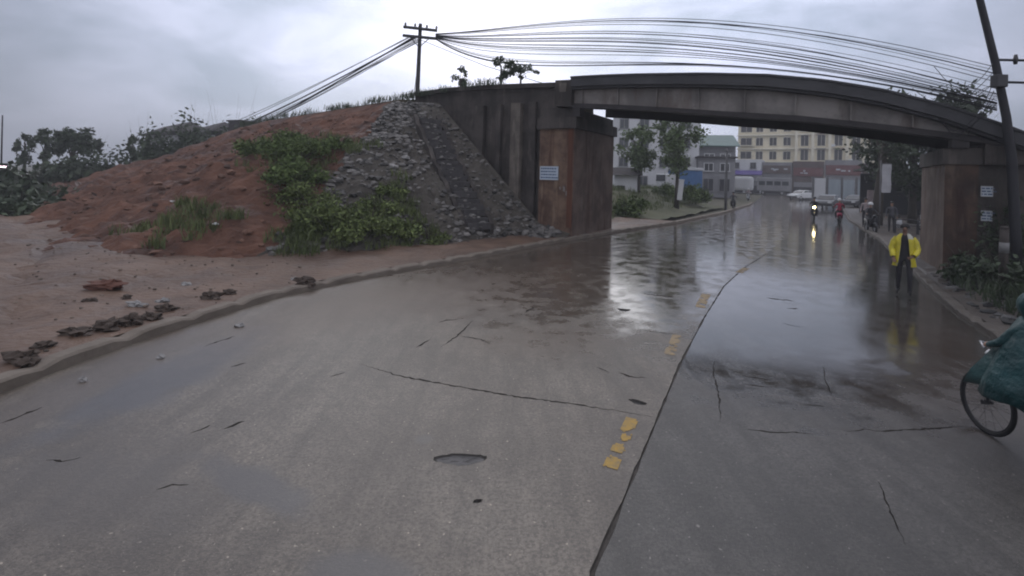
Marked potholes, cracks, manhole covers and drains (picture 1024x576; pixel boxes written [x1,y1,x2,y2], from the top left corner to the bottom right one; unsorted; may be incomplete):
crack [417,319,488,347]
crack [713,360,721,419]
crack [331,364,651,417]
pothole [433,453,487,466]
crack [879,483,905,544]
